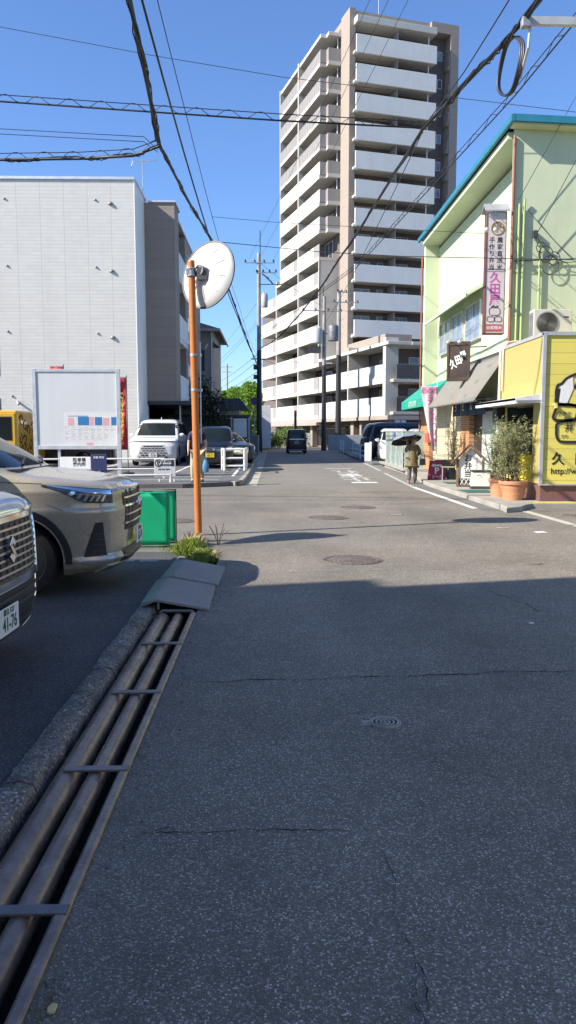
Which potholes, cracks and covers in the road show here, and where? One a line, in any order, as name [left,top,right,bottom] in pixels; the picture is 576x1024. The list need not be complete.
manhole cover [322,555,383,565]
drain grate [0,609,196,1024]
crack [381,852,433,1024]
manhole cover [361,716,401,729]
crack [126,827,352,839]
crack [480,587,544,612]
crack [195,670,576,683]
